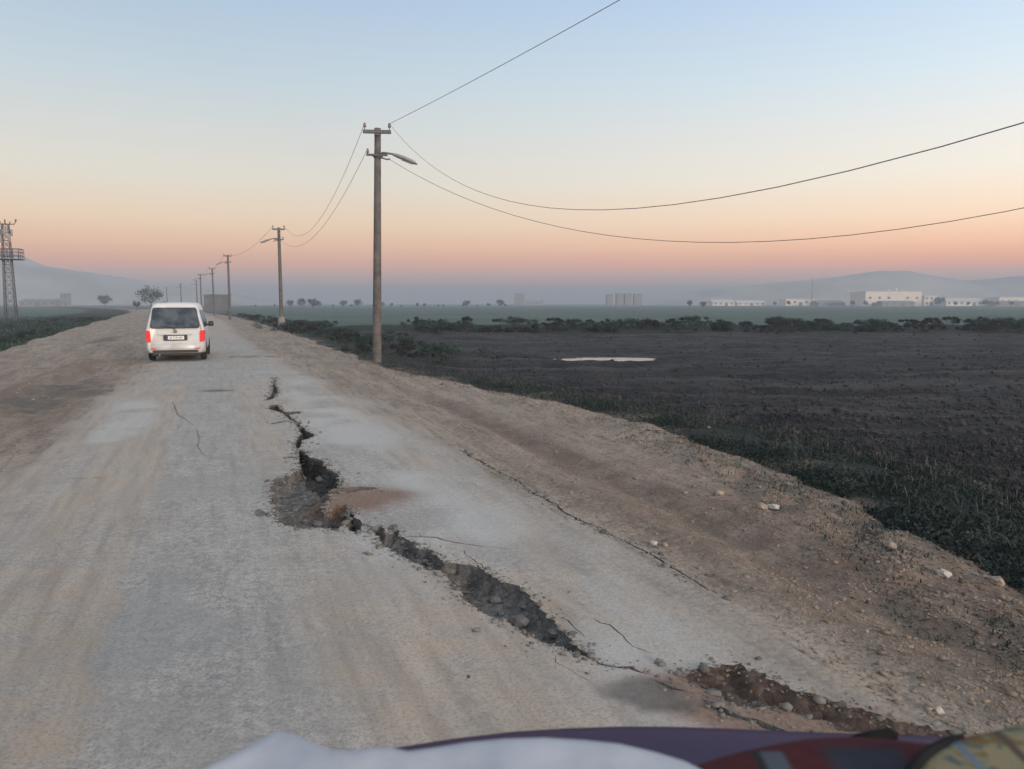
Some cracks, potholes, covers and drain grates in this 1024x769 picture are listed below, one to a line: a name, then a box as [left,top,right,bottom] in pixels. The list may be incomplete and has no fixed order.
pothole [681,663,951,737]
crack [266,379,340,497]
crack [172,402,223,458]
pothole [267,469,375,532]
crack [362,452,785,731]
